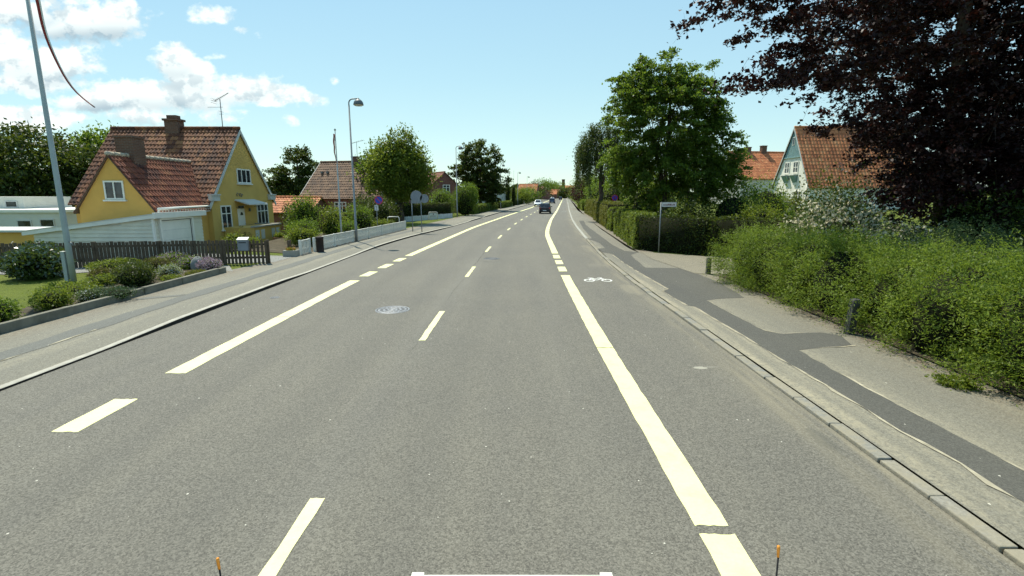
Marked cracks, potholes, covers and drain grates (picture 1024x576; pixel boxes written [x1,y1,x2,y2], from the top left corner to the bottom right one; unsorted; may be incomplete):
manhole cover [375,306,410,314]
